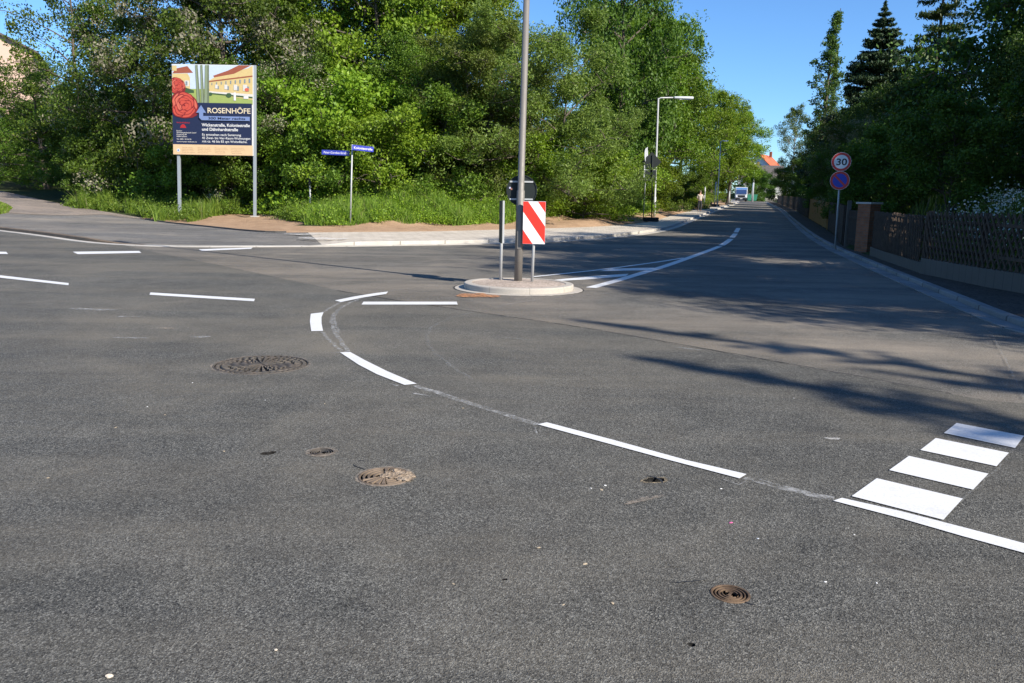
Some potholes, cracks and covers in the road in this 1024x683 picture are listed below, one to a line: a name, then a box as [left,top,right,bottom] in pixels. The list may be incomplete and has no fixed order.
manhole cover [211,355,310,374]
utility cover [356,466,416,486]
utility cover [308,448,335,457]
